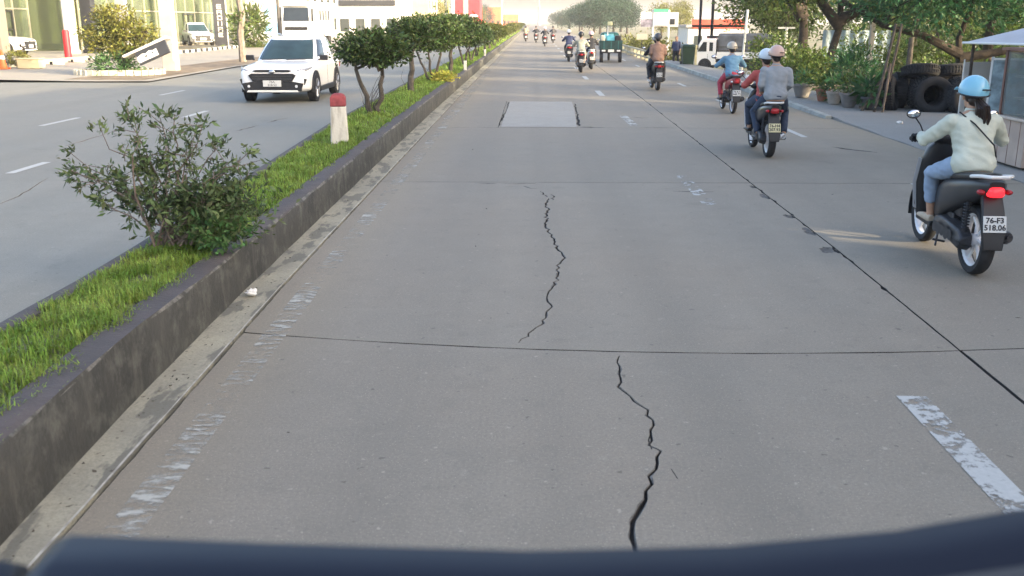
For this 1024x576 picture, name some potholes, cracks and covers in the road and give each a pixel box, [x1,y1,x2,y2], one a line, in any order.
crack [616,356,678,548]
crack [478,183,566,343]
